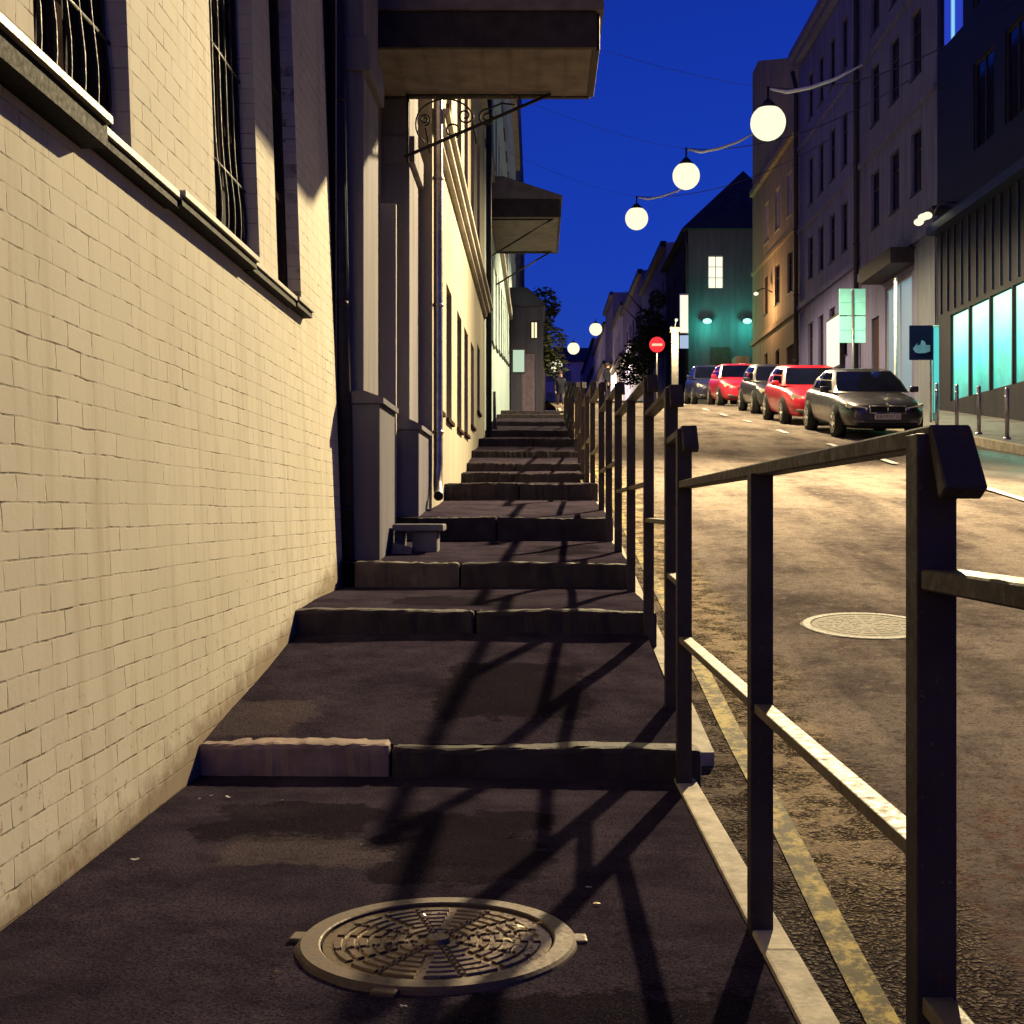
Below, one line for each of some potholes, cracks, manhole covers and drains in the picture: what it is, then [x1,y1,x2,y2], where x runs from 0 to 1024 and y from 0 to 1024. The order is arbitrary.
manhole cover [800,612,906,640]
manhole cover [289,897,588,999]
